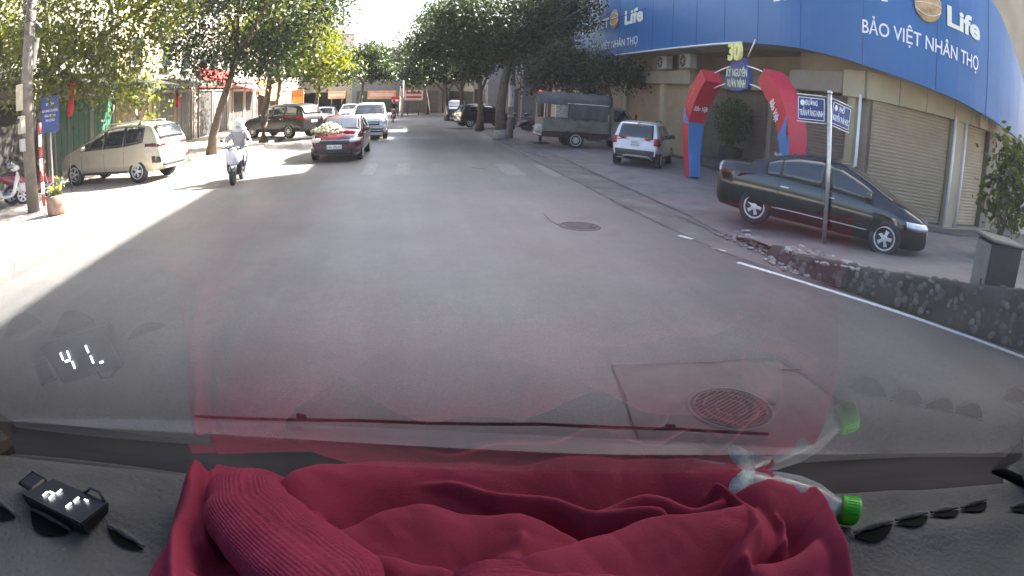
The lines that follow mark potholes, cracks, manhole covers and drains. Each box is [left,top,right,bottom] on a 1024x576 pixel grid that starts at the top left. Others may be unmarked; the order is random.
manhole cover [559,222,601,231]
